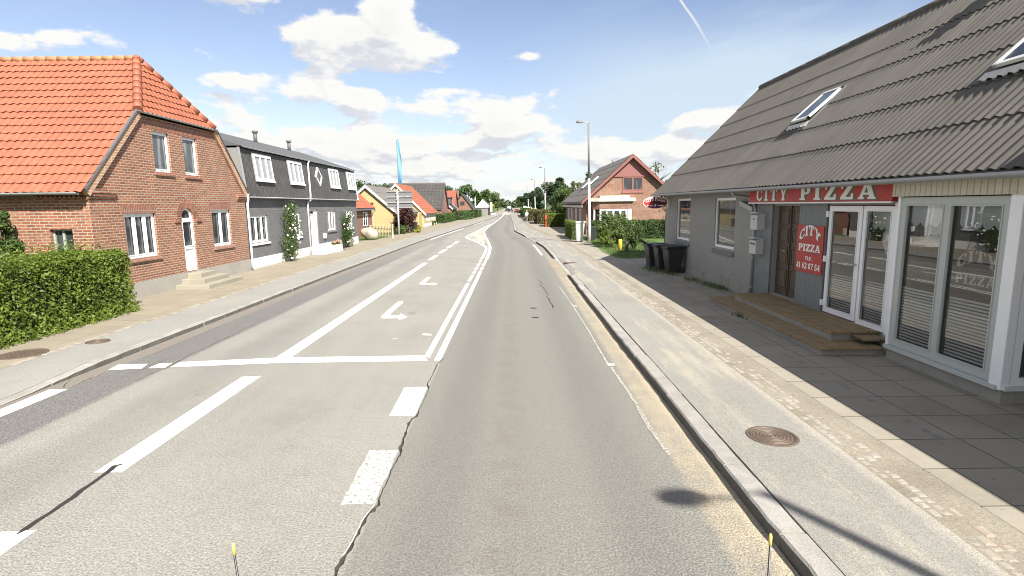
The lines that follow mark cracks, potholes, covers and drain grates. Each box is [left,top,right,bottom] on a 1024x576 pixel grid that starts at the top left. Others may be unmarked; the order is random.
manhole cover [746,426,800,447]
crack [334,359,443,576]
manhole cover [0,348,50,360]
